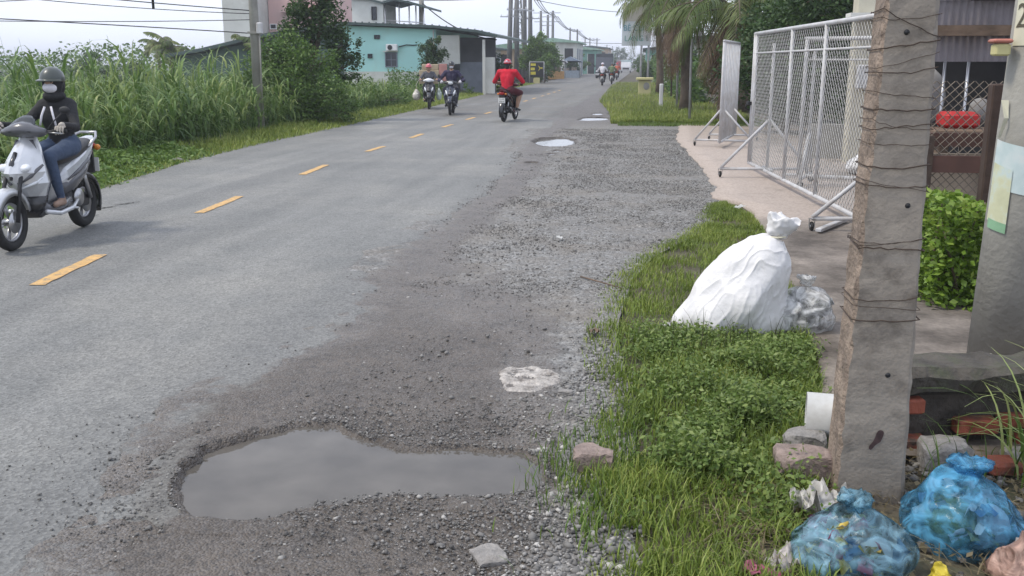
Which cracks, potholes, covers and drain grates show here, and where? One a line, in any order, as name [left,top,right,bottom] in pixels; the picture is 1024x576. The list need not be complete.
pothole [526,137,582,147]
pothole [135,413,580,536]
